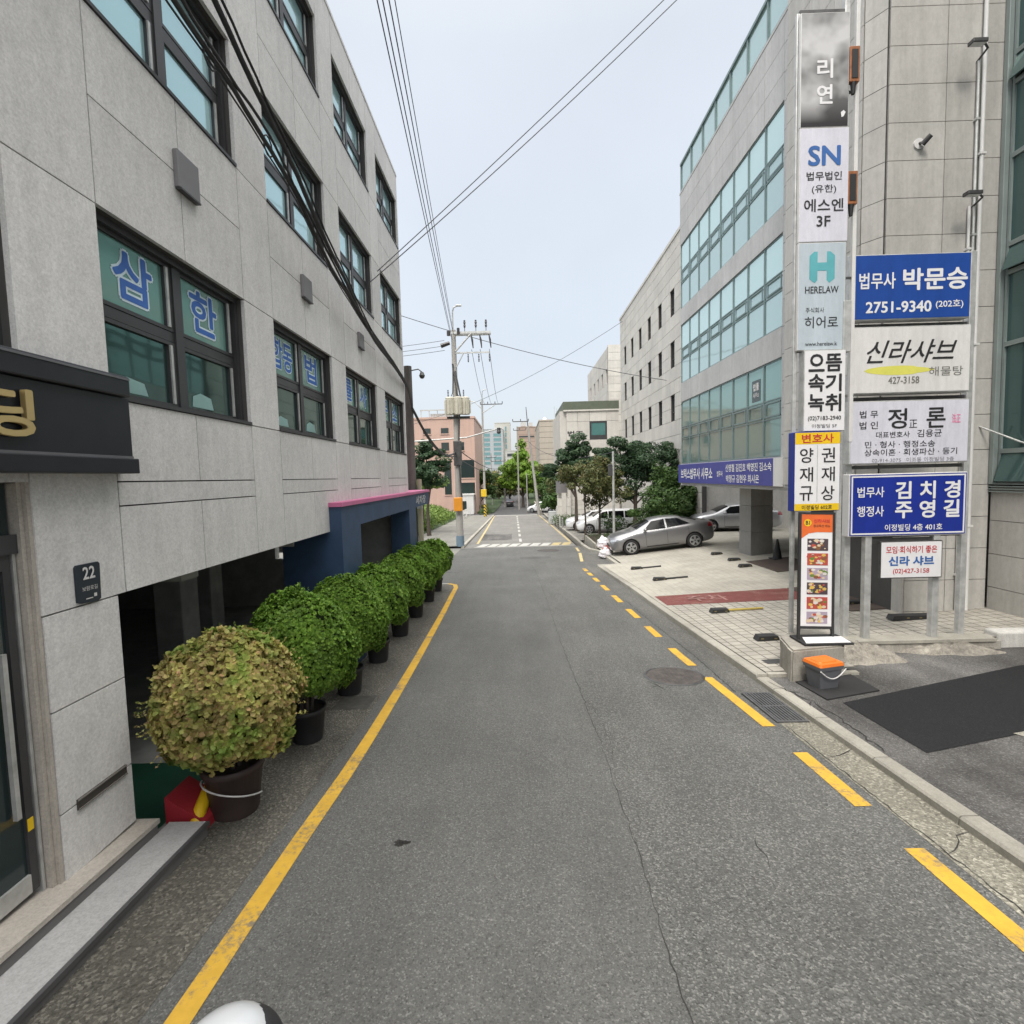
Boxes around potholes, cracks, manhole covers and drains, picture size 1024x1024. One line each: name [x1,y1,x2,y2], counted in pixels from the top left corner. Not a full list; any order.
manhole cover [643,667,705,686]
drain grate [742,692,809,723]
crack [781,687,885,757]
